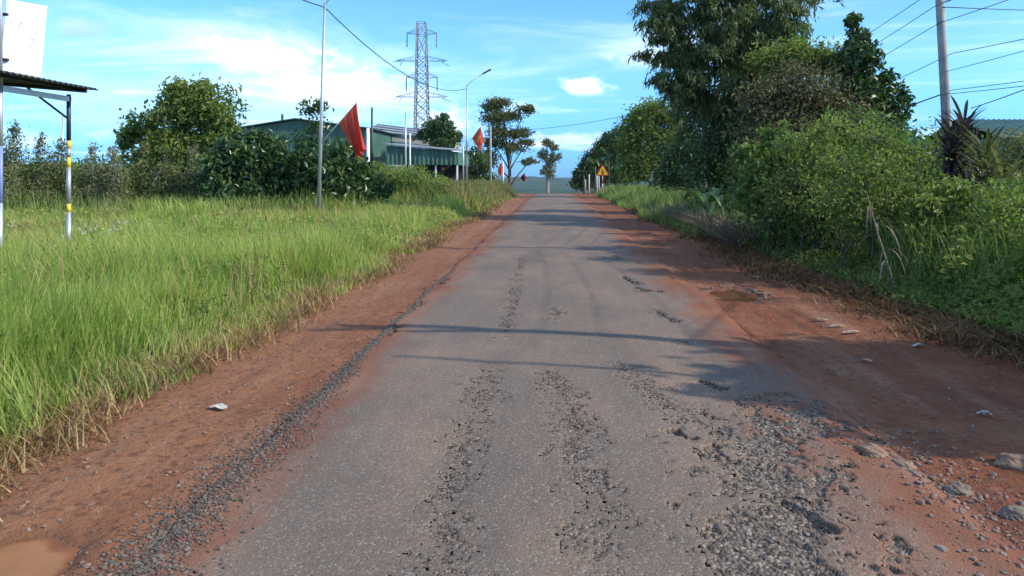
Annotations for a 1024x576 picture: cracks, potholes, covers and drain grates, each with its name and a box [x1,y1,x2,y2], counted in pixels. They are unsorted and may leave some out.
pothole [760,494,851,541]
pothole [645,309,683,323]
pothole [615,276,644,285]
pothole [655,424,710,444]
